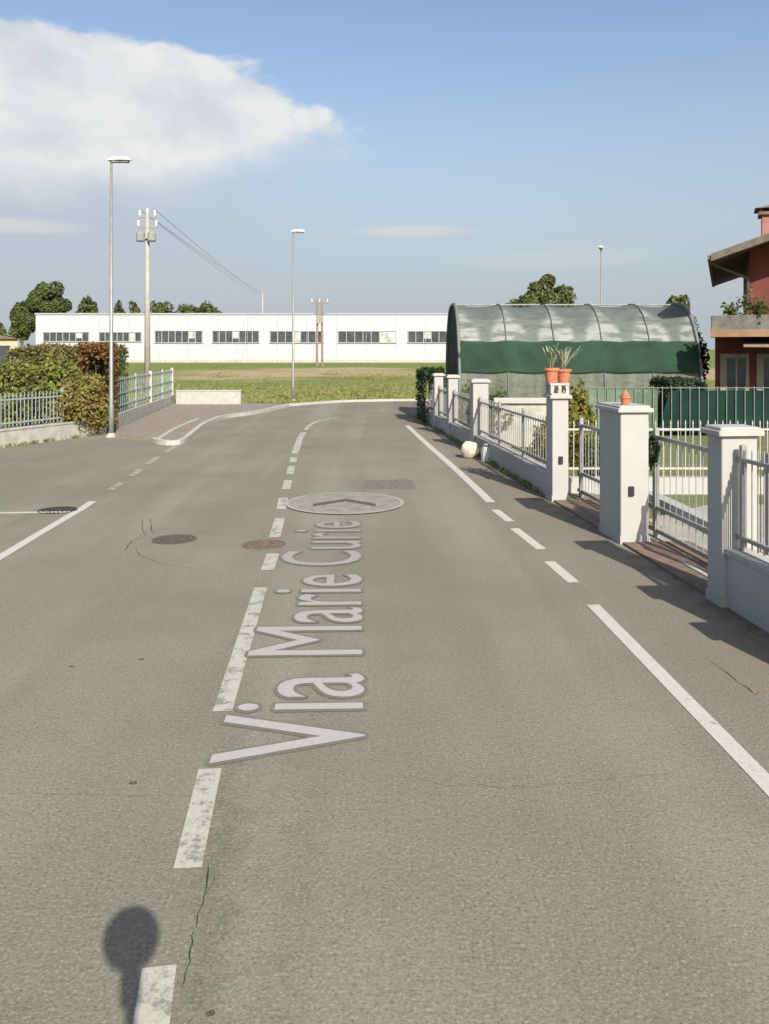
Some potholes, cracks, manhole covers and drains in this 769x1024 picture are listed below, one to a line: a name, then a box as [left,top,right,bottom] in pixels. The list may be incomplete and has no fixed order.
manhole cover [37,506,78,514]
crack [124,518,208,569]
manhole cover [152,534,197,545]
crack [180,864,215,993]
crack [423,773,676,789]
crack [705,658,768,695]
manhole cover [242,539,286,550]
